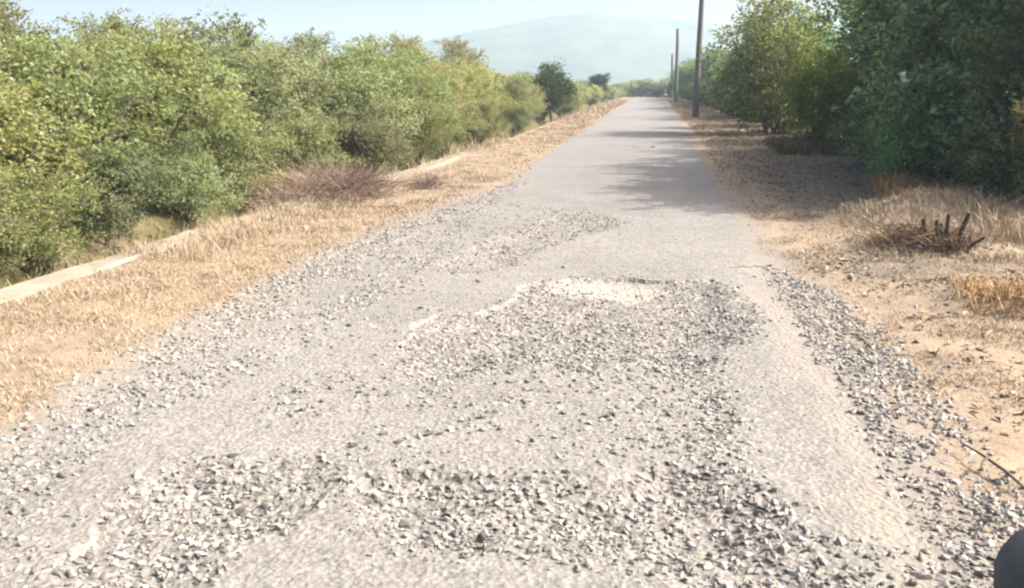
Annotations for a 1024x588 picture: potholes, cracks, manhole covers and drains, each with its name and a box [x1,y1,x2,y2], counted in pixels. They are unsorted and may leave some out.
pothole [385,277,769,455]
pothole [30,456,349,588]
pothole [346,466,867,588]
pothole [434,216,622,276]
